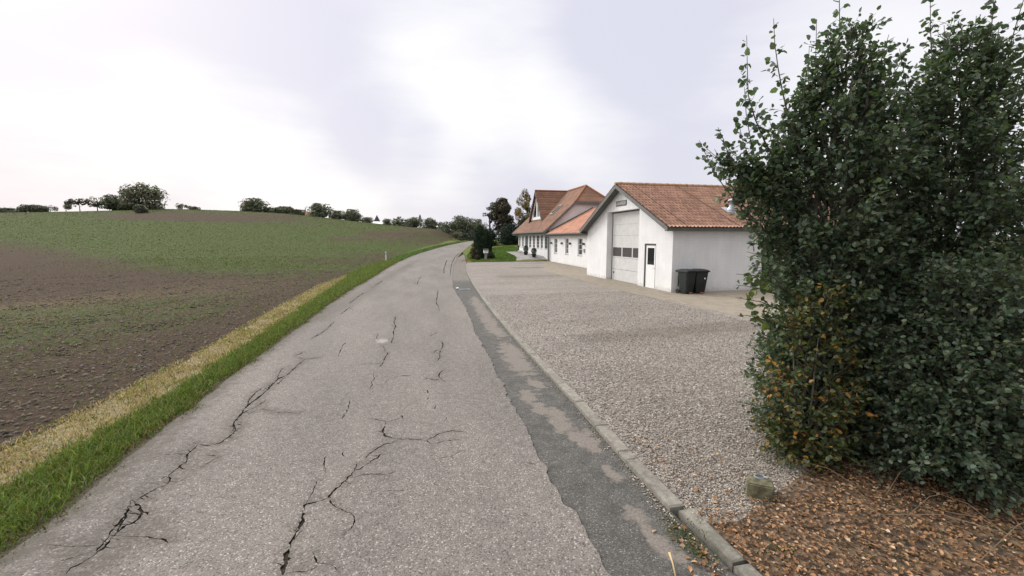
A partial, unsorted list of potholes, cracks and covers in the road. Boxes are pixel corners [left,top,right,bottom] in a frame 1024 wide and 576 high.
crack [55,353,320,574]
crack [276,318,463,575]
